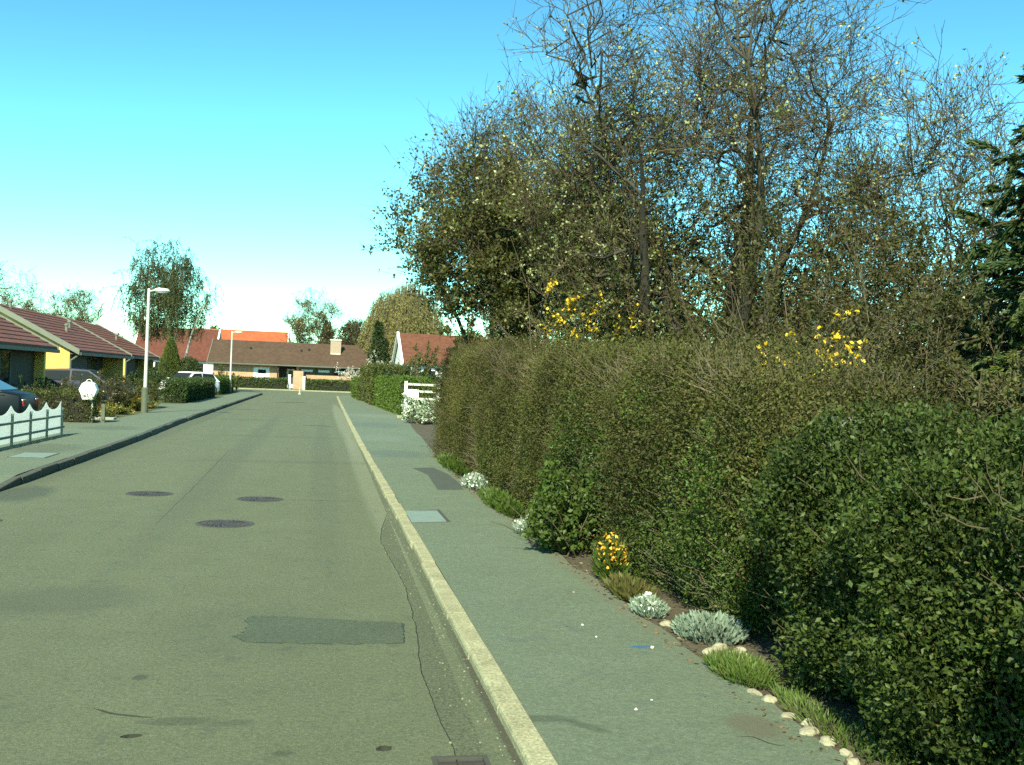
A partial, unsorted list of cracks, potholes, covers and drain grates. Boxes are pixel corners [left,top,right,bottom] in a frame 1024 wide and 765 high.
crack [380,517,458,765]
manhole cover [195,519,254,528]
crack [93,708,153,718]
manhole cover [405,509,450,523]
drain grate [431,754,491,765]
